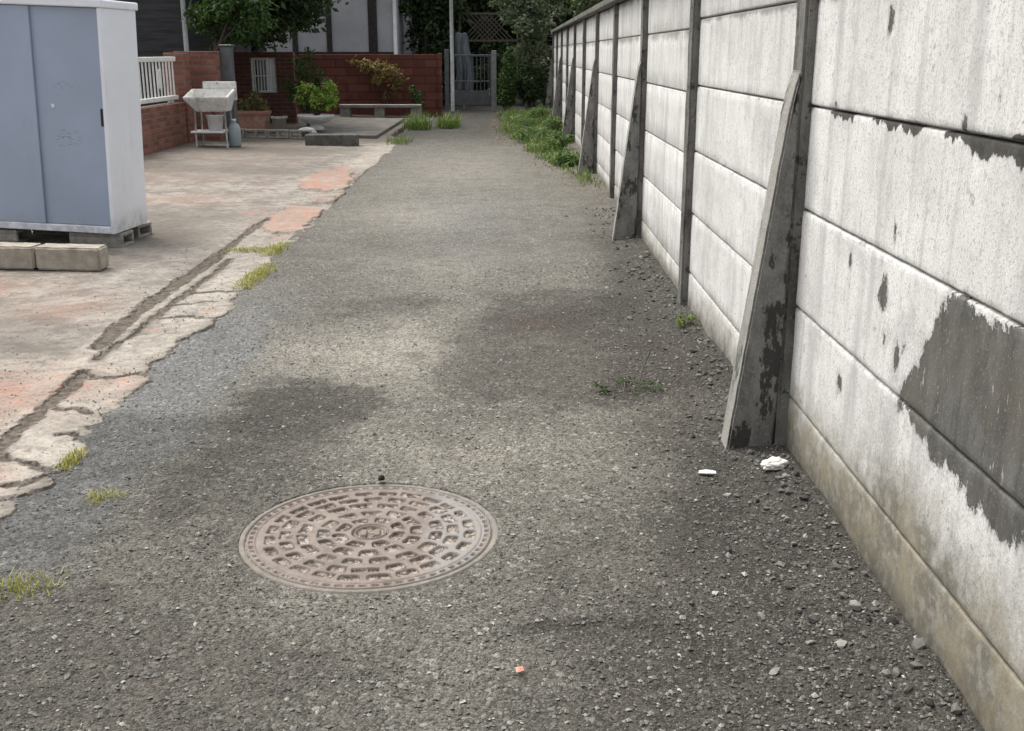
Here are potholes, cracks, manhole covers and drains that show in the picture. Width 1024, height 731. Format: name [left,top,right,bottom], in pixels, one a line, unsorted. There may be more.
crack [0,221,265,502]
manhole cover [239,484,499,594]
